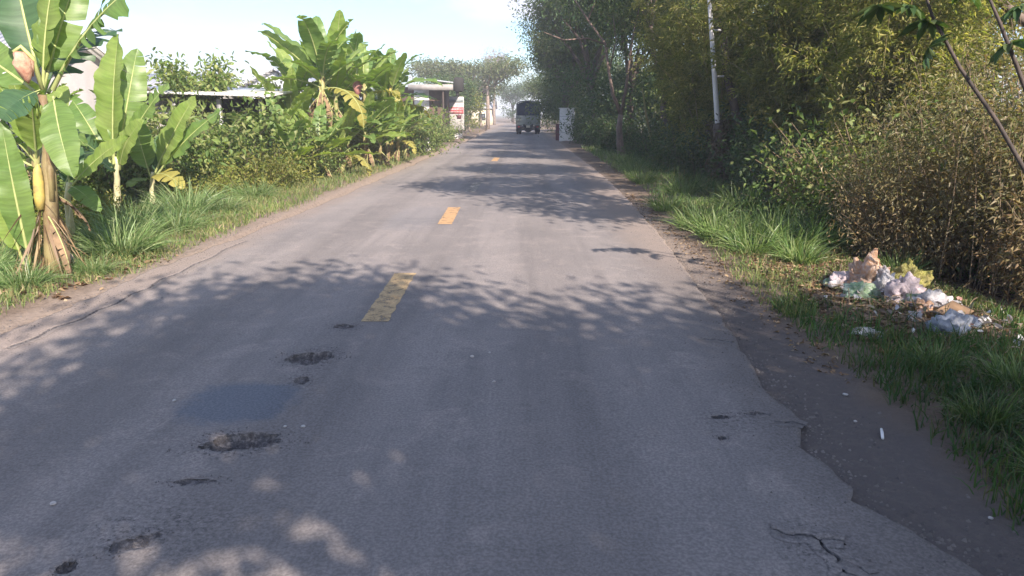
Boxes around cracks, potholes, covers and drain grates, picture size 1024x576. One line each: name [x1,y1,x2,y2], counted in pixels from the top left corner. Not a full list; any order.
pothole [167,426,309,459]
pothole [328,322,363,331]
pothole [269,347,352,370]
pothole [81,527,181,560]
pothole [708,433,735,444]
pothole [701,412,737,422]
crack [771,522,880,576]
